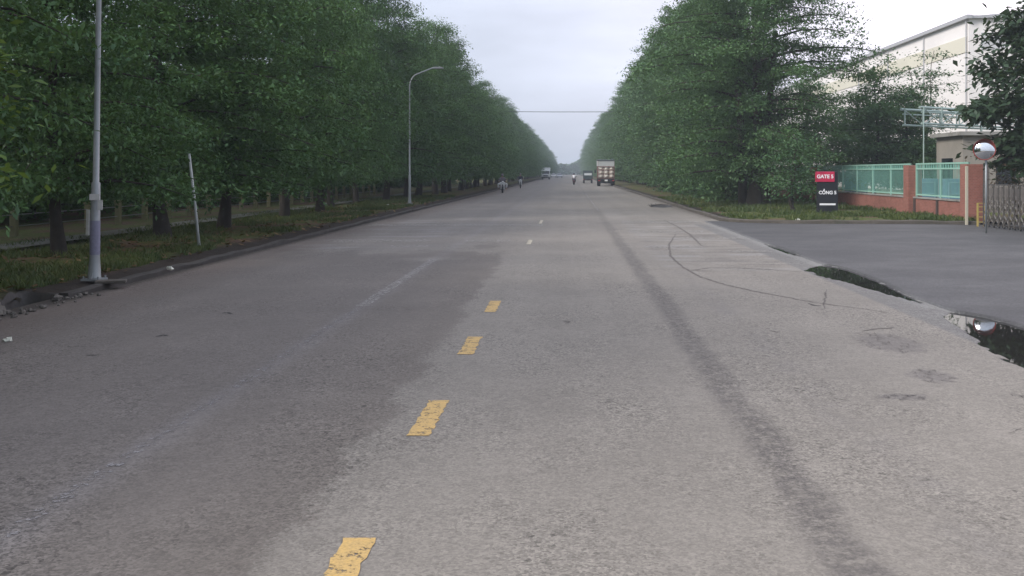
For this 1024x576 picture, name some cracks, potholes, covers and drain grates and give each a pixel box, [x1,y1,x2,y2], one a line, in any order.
crack [667,221,888,313]
